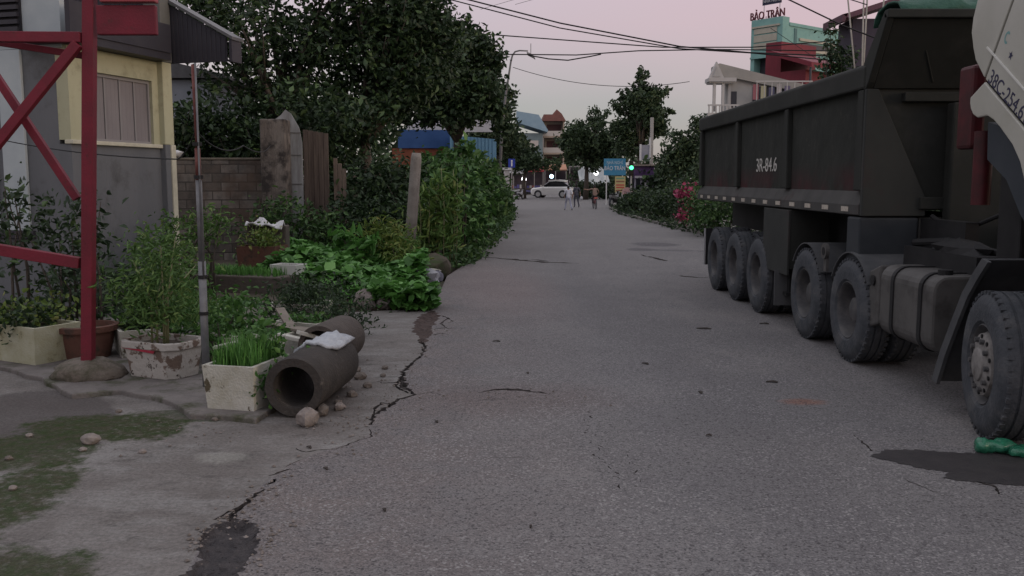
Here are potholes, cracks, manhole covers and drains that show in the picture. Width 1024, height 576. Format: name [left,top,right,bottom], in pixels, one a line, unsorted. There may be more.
crack [584,416,641,488]
crack [478,388,548,400]
crack [214,316,452,521]
